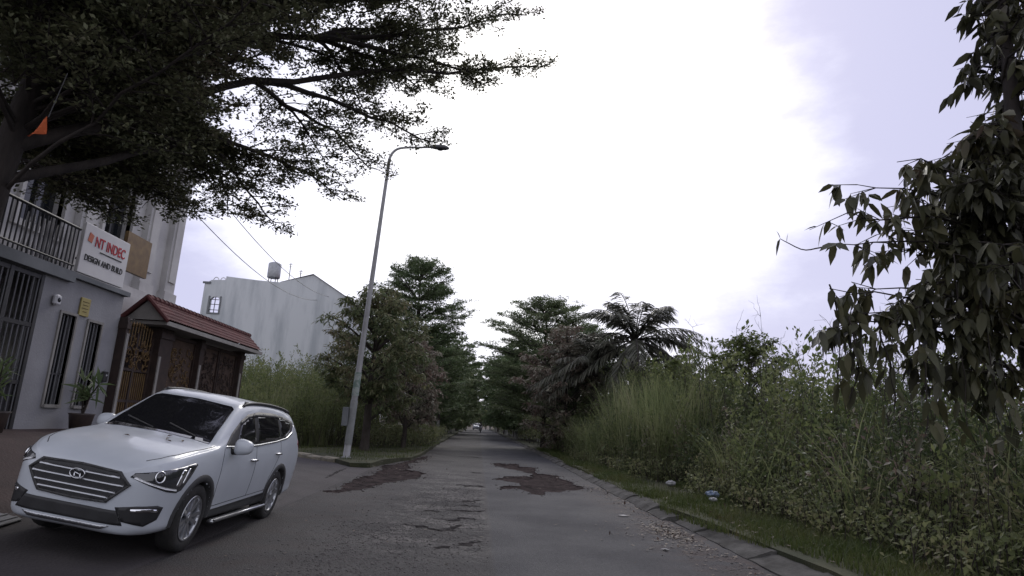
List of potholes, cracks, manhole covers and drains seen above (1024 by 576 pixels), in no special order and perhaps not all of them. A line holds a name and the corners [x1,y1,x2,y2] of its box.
pothole [493,463,584,495]
pothole [323,456,428,493]
